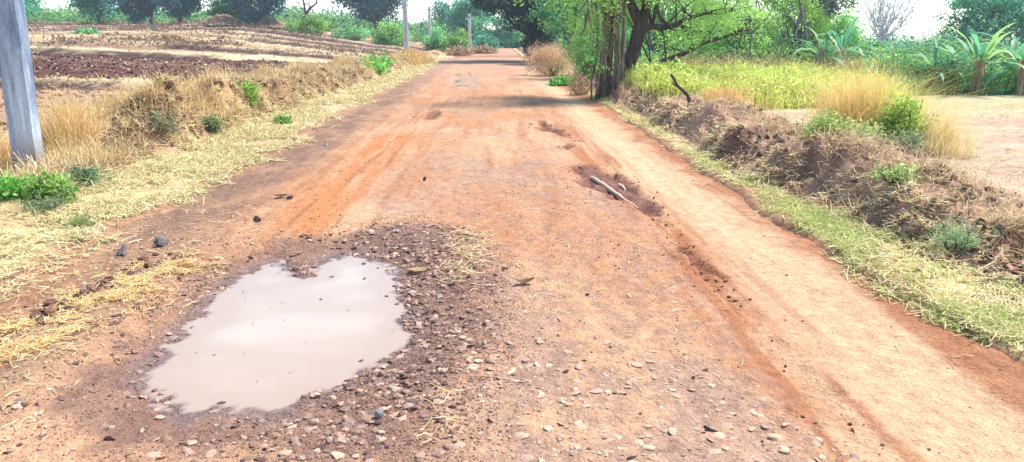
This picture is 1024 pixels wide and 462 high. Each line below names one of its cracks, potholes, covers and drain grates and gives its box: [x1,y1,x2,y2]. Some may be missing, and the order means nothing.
pothole [558,143,579,151]
pothole [528,120,584,143]
pothole [562,162,684,228]
pothole [414,109,445,121]
pothole [39,216,499,462]
